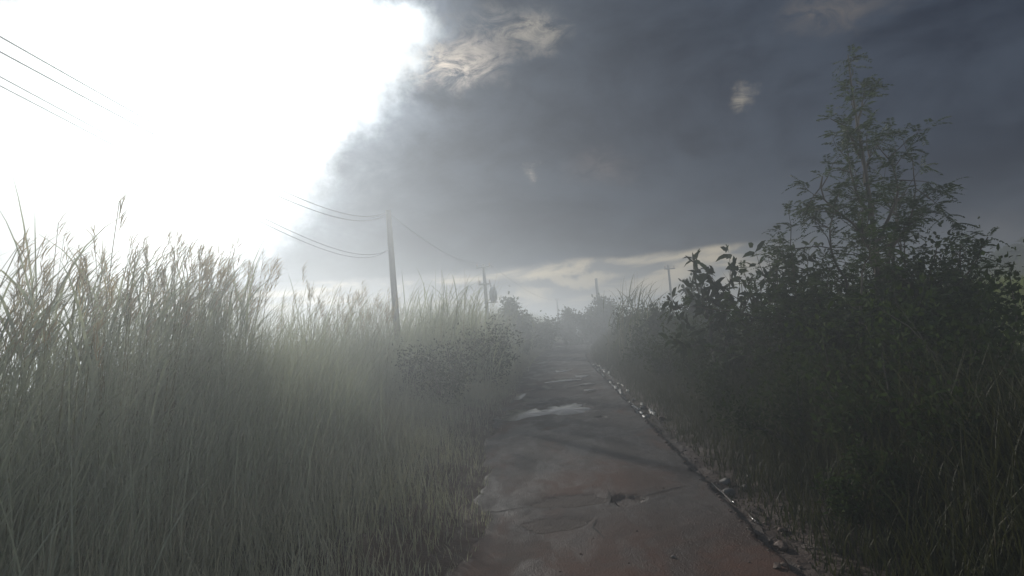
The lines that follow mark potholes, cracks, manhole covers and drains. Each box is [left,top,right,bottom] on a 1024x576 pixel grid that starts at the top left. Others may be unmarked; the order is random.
crack [595,368,802,576]
pothole [612,495,645,507]
